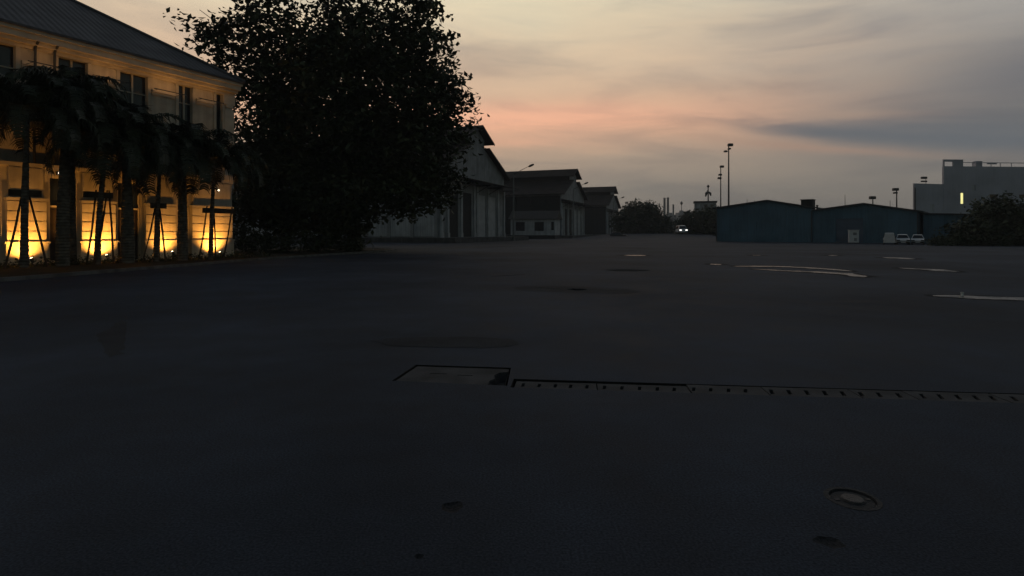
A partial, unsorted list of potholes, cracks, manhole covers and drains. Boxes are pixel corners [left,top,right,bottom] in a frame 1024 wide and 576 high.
pothole [441,501,463,513]
pothole [812,536,846,548]
manhole cover [823,487,883,511]
